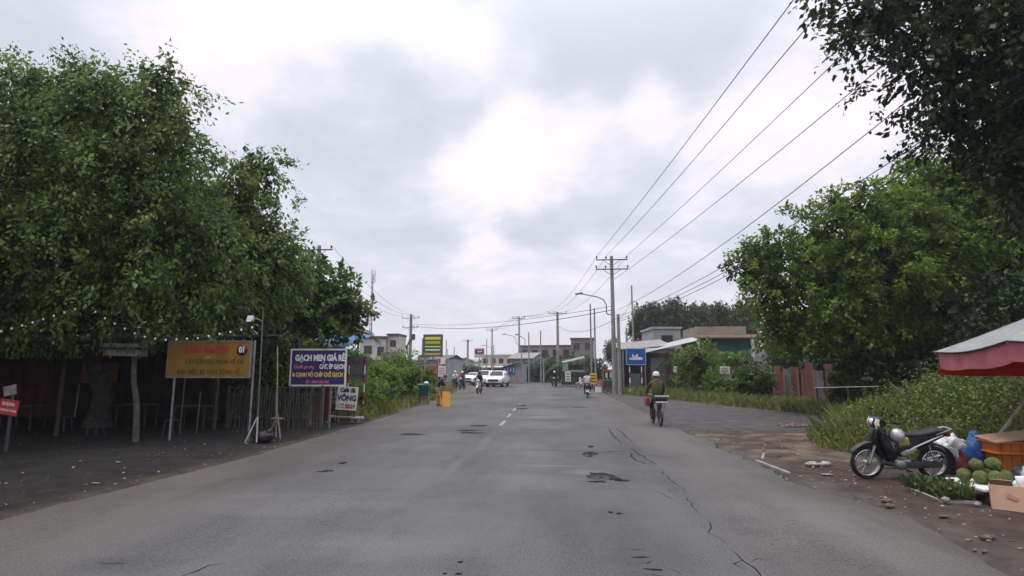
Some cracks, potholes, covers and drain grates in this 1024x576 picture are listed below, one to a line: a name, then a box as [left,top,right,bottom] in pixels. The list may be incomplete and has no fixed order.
pothole [585,472,622,481]
crack [598,428,764,576]
